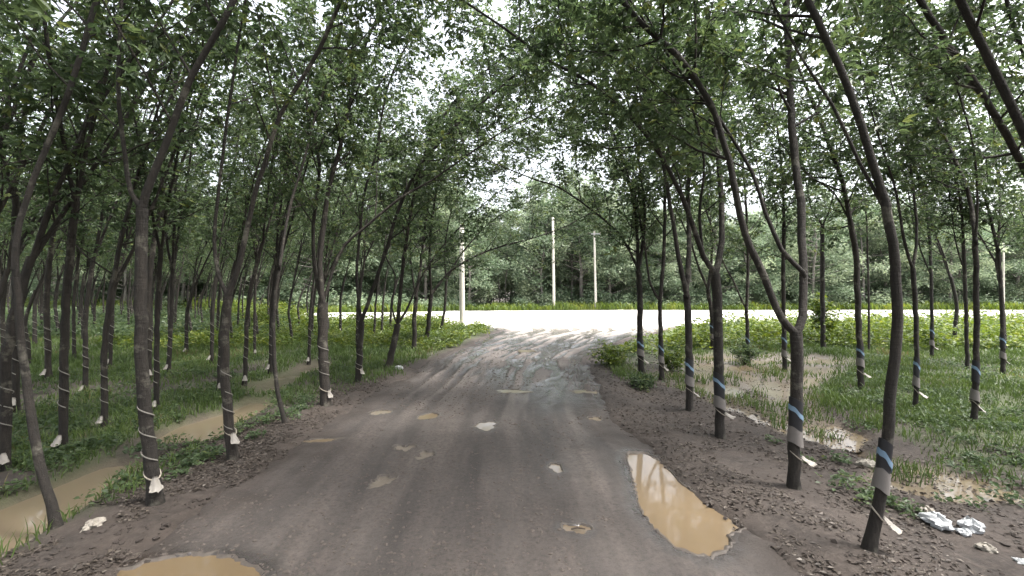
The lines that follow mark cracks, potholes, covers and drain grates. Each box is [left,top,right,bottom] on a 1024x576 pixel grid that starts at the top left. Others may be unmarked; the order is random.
pothole [472,421,498,432]
pothole [559,522,594,534]
pothole [392,443,419,452]
pothole [117,549,267,576]
pothole [623,451,747,560]
pothole [547,462,564,473]
pothole [411,449,437,461]
pothole [366,474,399,490]
pothole [416,412,441,420]
